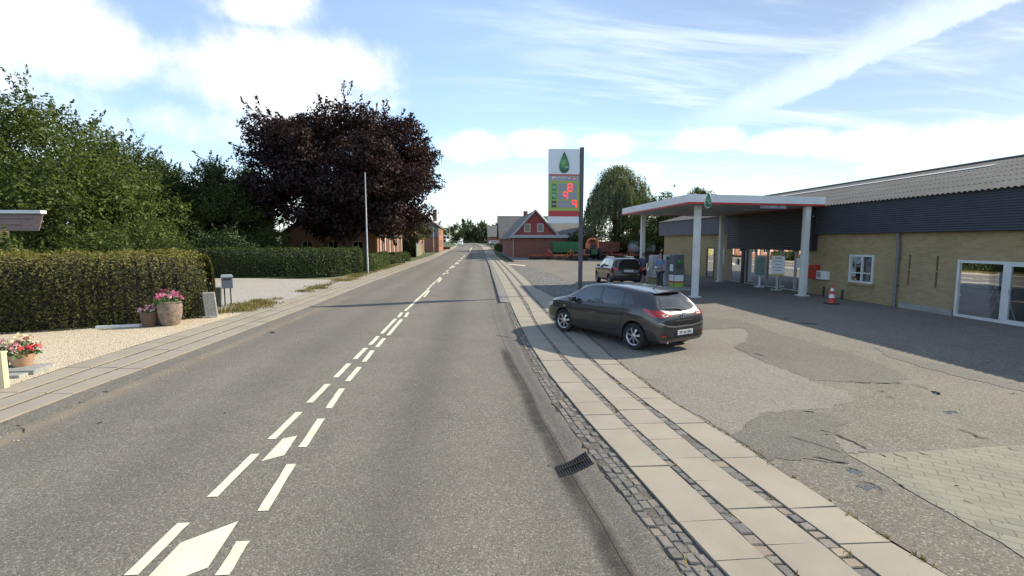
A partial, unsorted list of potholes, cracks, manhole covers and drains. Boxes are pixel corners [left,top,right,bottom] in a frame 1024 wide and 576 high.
crack [792,430,867,463]
pothole [852,480,883,498]
drain grate [555,452,594,477]
